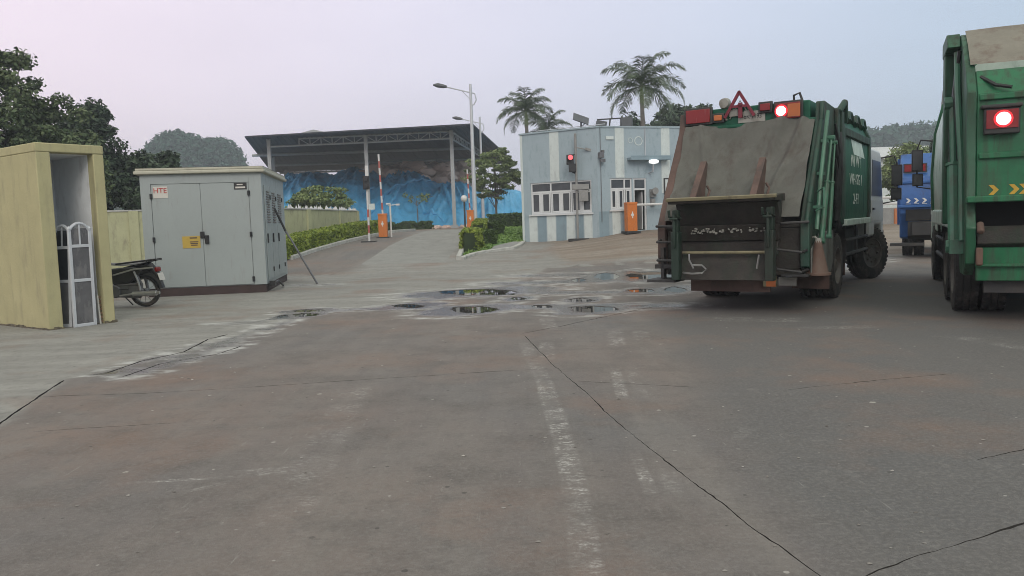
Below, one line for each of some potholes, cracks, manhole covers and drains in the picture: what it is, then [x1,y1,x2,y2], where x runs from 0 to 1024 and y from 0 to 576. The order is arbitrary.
crack [0,380,164,432]
crack [866,522,1024,576]
pothole [594,272,619,280]
crack [525,336,820,576]
